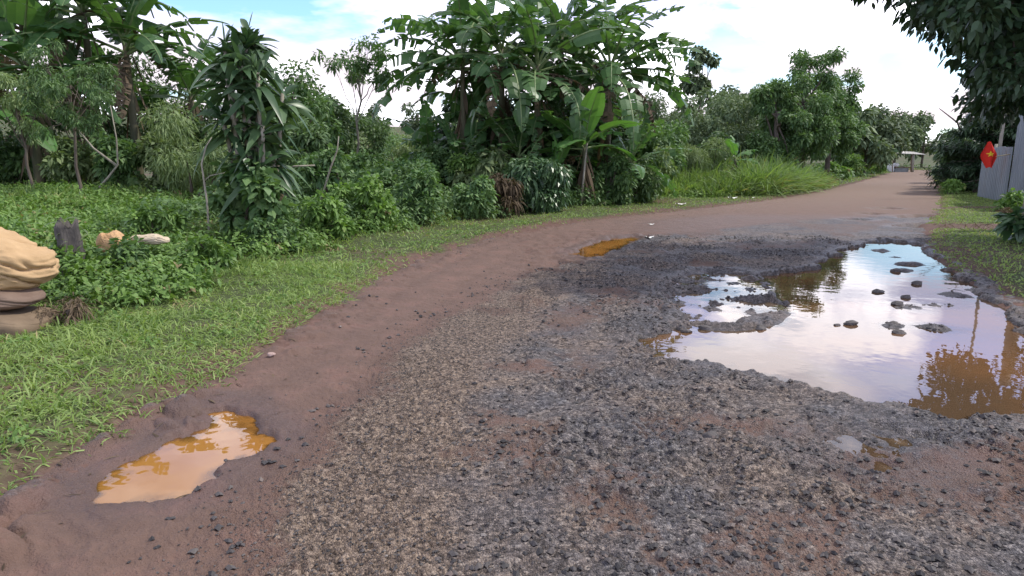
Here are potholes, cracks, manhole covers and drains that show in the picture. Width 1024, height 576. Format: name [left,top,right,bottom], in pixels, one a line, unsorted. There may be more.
pothole [563,233,645,258]
pothole [638,238,1024,421]
pothole [37,391,292,515]
